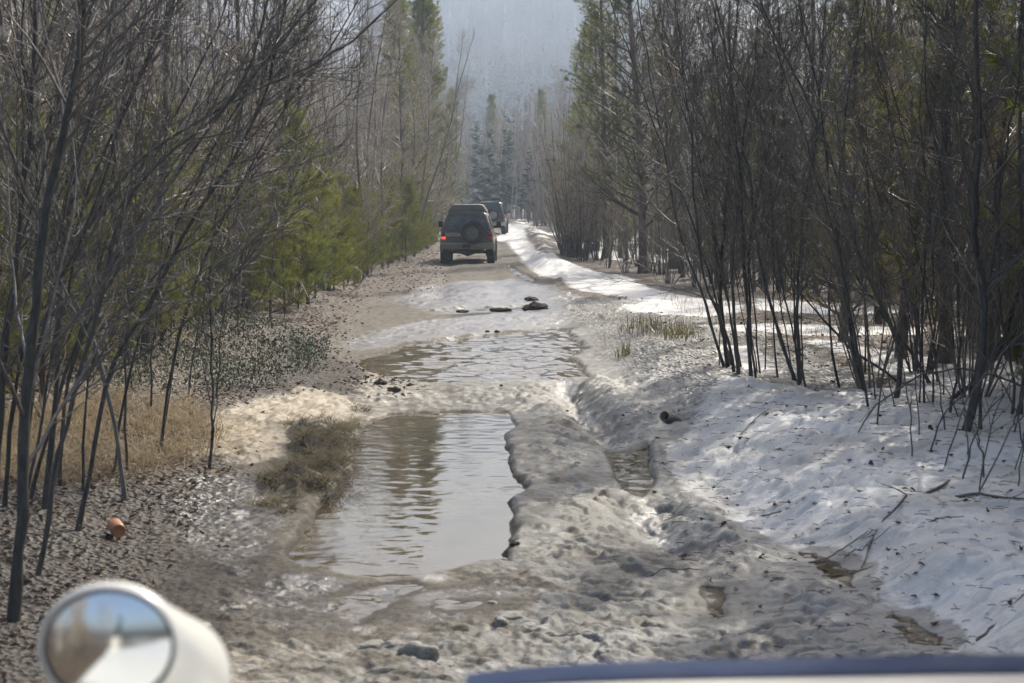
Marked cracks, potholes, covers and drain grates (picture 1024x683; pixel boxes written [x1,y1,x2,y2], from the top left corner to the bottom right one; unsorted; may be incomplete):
pothole [589,432,667,498]
pothole [269,408,541,579]
pothole [345,326,597,384]
